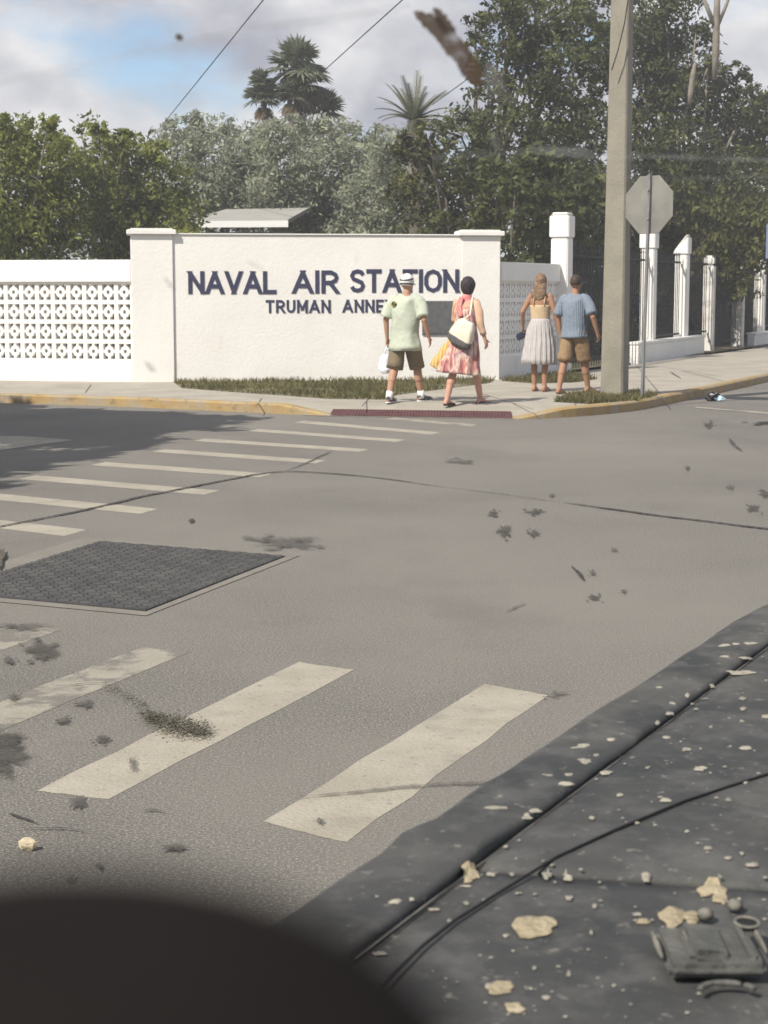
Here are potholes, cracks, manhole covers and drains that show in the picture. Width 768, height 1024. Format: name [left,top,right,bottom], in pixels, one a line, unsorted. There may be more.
manhole cover [0,538,300,615]
